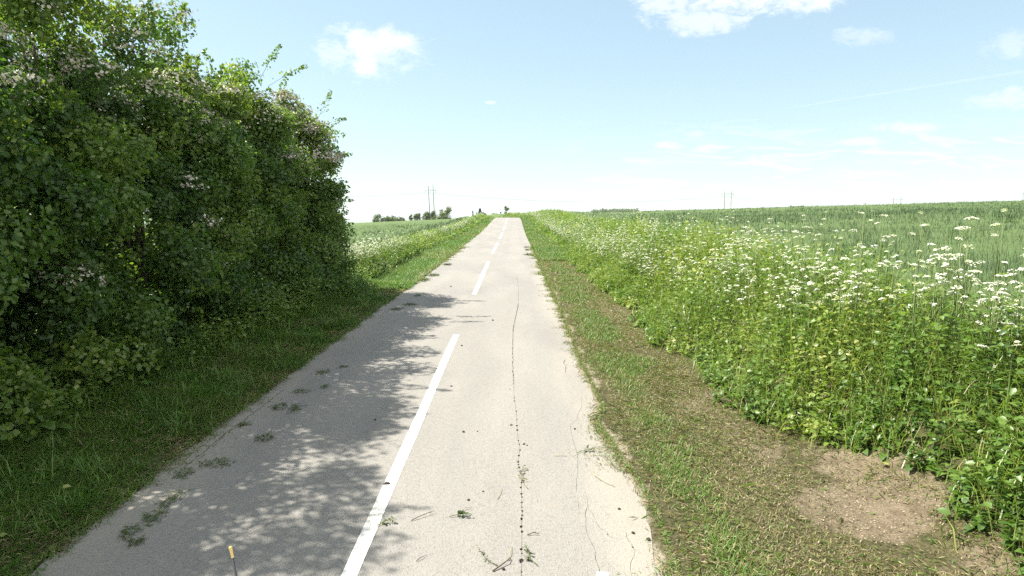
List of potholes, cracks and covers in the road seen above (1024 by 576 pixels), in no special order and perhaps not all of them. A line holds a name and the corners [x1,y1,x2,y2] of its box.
crack [570,412,635,576]
crack [509,281,528,576]
